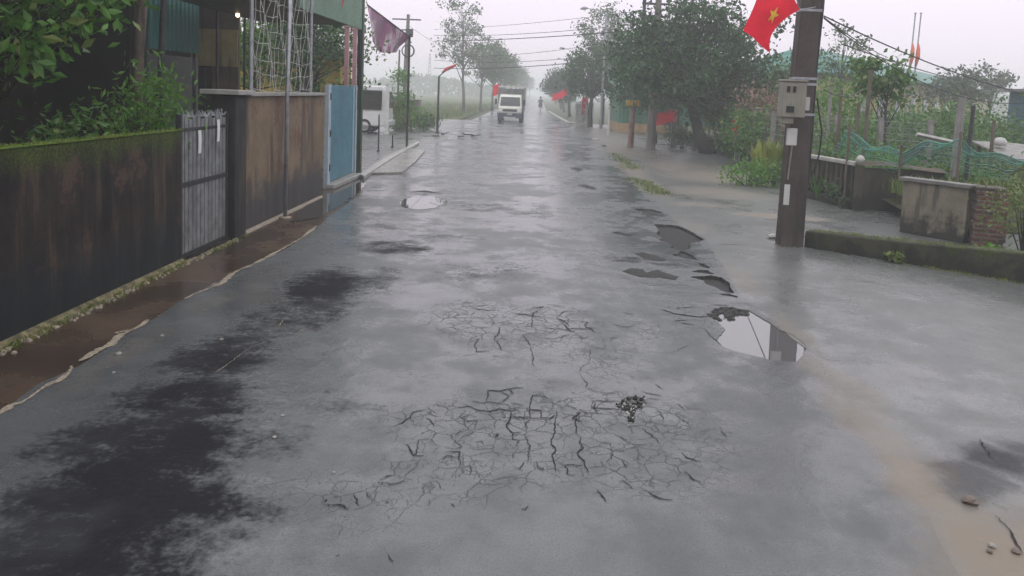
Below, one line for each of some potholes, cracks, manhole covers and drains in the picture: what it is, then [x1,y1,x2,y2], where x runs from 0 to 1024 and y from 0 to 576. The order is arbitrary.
pothole [706,307,806,362]
pothole [635,252,666,261]
crack [325,475,404,509]
crack [395,302,690,506]
pothole [655,224,706,250]
pothole [692,275,734,293]
pothole [624,268,679,280]
pothole [616,395,647,426]
